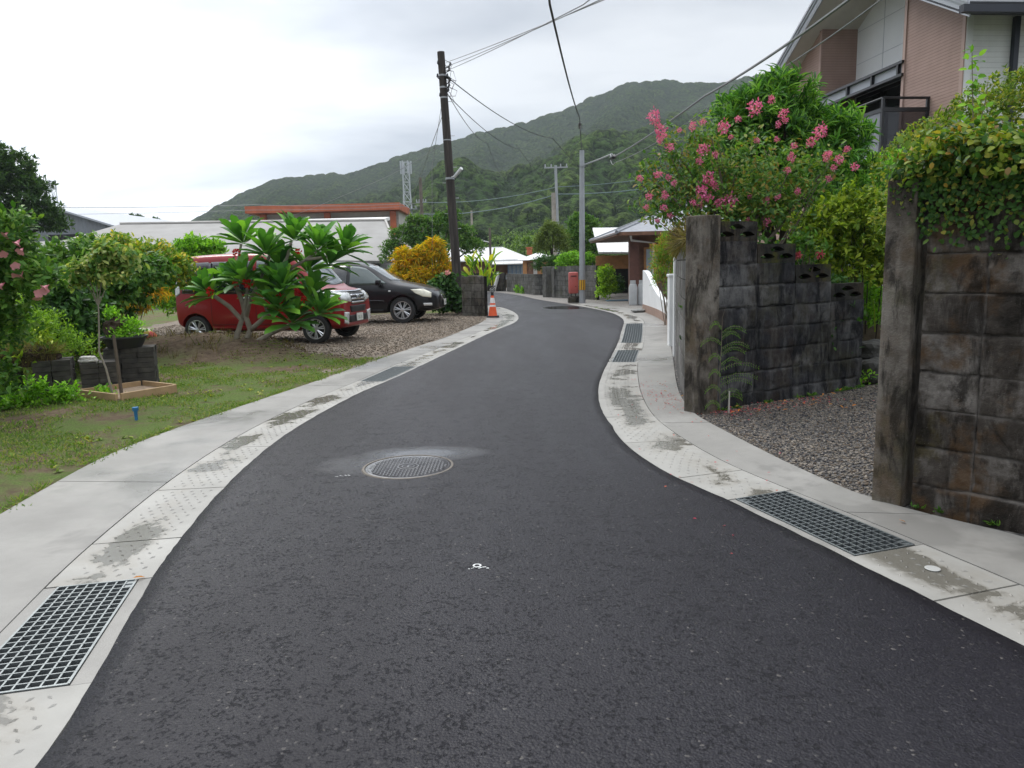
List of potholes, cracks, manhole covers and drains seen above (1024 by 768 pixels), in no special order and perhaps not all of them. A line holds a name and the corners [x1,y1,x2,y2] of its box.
drain grate [362,366,415,381]
drain grate [621,323,643,343]
drain grate [736,491,915,556]
manhole cover [361,455,454,479]
drain grate [612,350,639,362]
drain grate [0,578,138,695]
